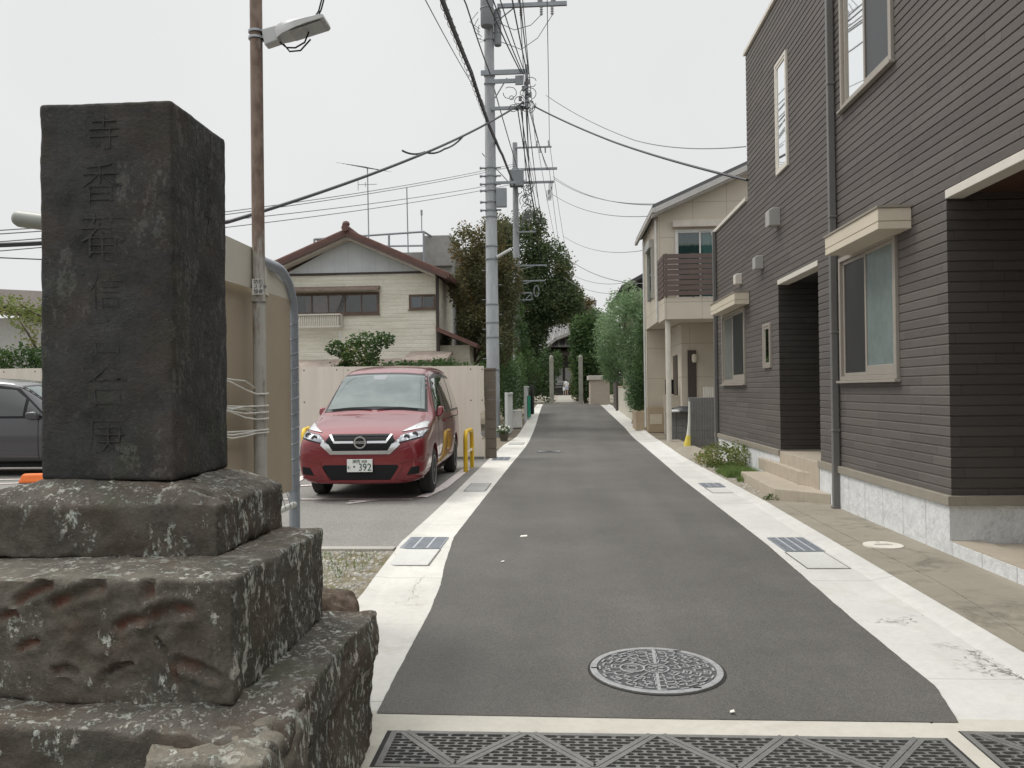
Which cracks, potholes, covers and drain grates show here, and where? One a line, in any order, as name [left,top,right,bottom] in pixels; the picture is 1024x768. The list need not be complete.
drain grate [767,537,851,569]
manhole cover [588,647,727,696]
crack [931,643,1023,684]
drain grate [698,483,735,493]
drain grate [389,537,449,566]
drain grate [958,731,1024,768]
drain grate [369,730,980,768]
